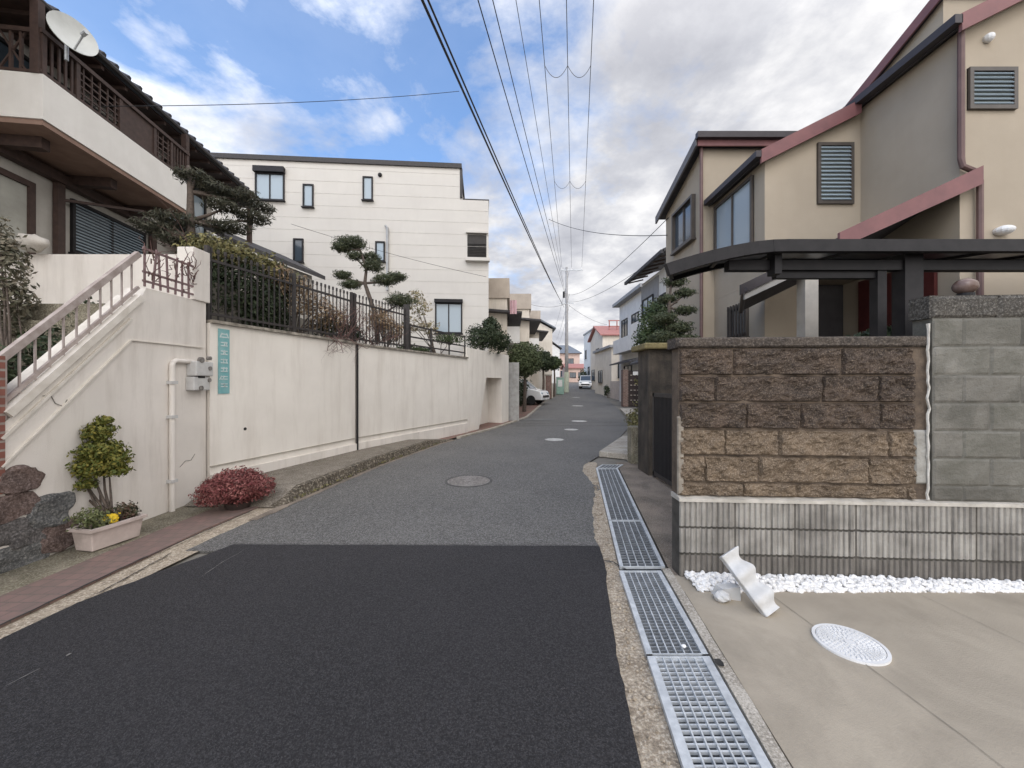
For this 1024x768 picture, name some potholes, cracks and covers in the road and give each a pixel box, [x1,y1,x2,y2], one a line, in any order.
drain grate [609,520,665,571]
drain grate [647,656,773,768]
drain grate [619,570,708,660]
drain grate [596,468,643,524]
manhole cover [445,475,493,487]
